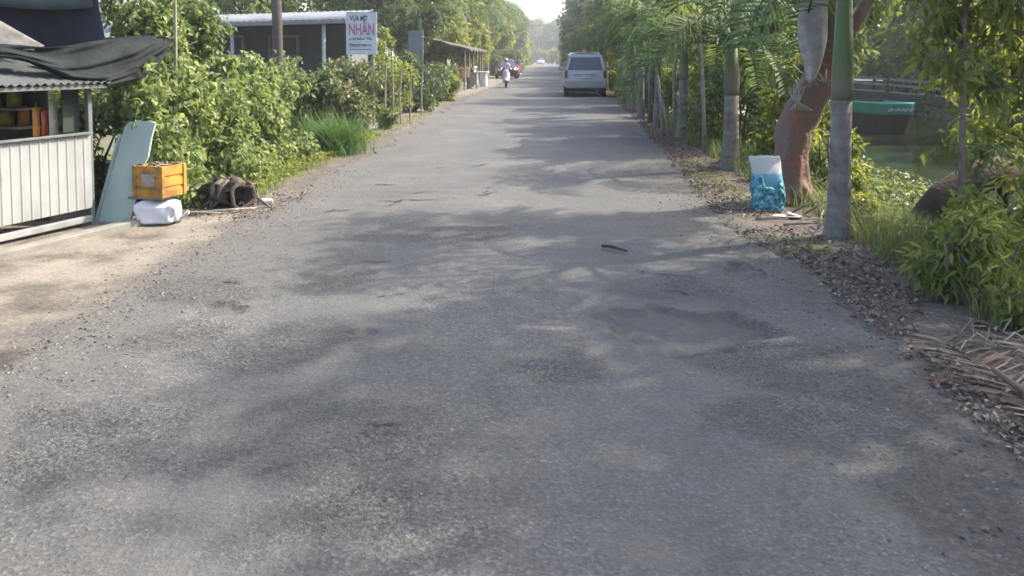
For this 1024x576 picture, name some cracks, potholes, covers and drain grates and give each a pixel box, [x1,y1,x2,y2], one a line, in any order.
pothole [184,300,250,318]
pothole [584,304,789,361]
